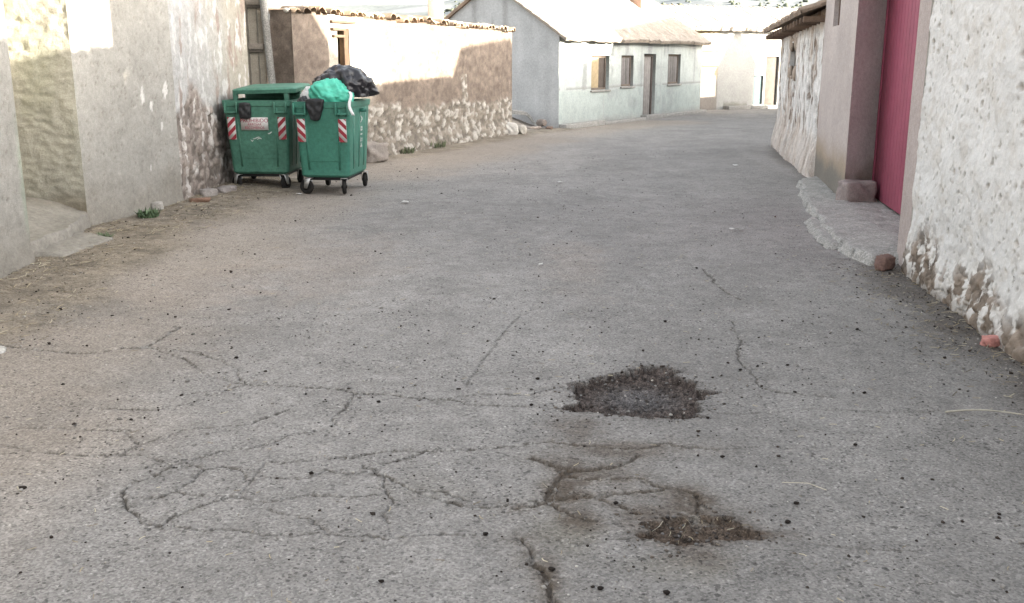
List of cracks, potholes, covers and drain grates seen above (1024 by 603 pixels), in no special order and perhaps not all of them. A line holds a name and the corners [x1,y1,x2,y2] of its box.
crack [517,536,640,603]
crack [6,316,551,425]
pothole [596,502,811,558]
crack [703,269,740,300]
pothole [543,361,743,425]
crack [2,411,553,541]
crack [512,442,712,522]
